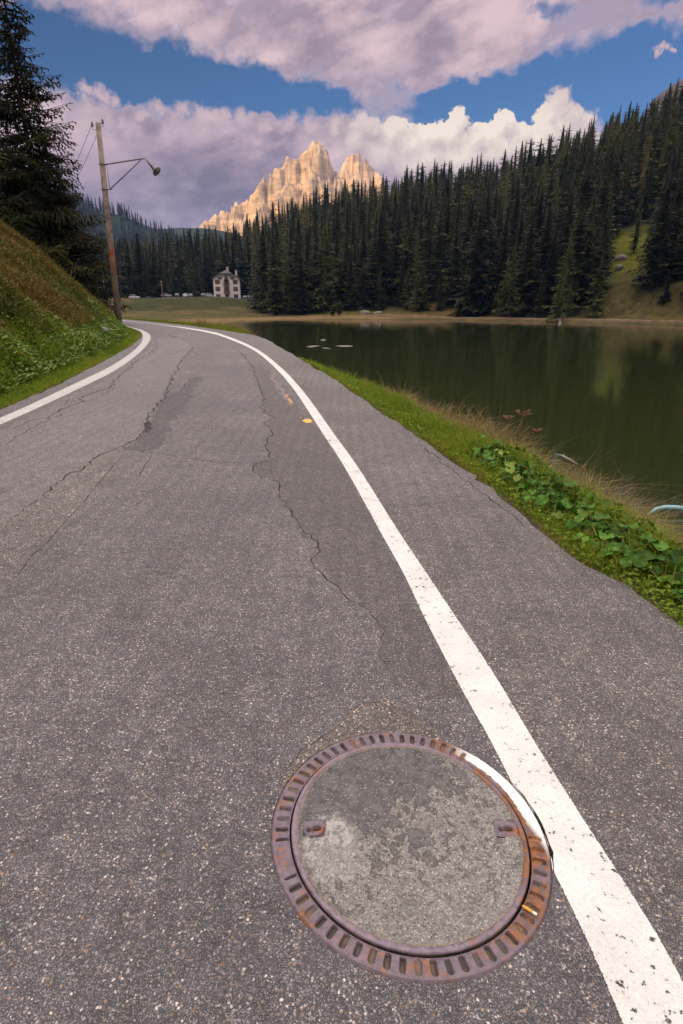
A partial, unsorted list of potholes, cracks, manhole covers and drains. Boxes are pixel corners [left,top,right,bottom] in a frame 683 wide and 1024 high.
crack [419,443,536,537]
crack [0,343,391,678]
manhole cover [271,732,552,984]
